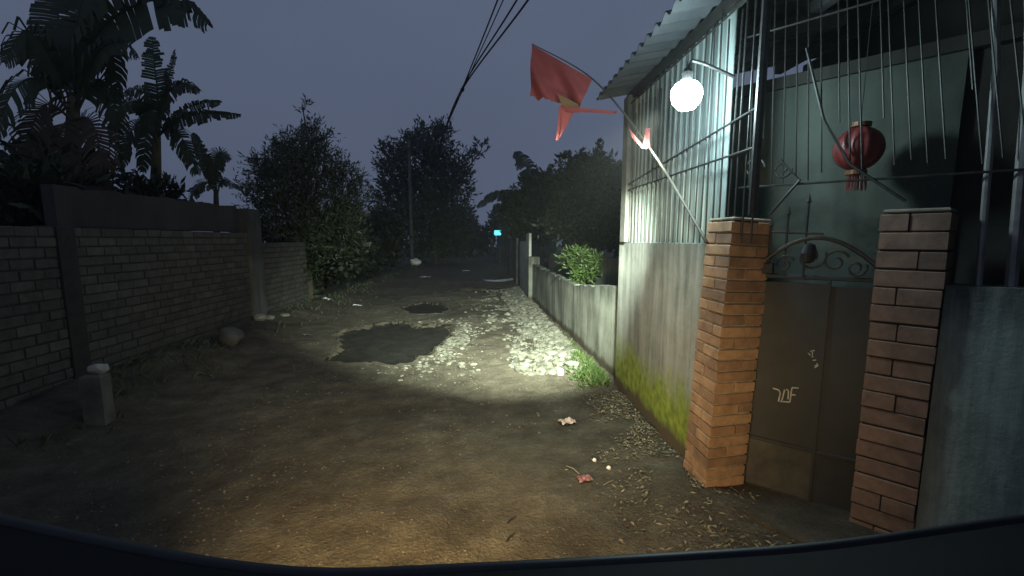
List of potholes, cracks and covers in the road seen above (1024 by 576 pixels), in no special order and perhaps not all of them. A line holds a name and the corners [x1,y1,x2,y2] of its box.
pothole [399,301,451,315]
pothole [318,320,458,368]
